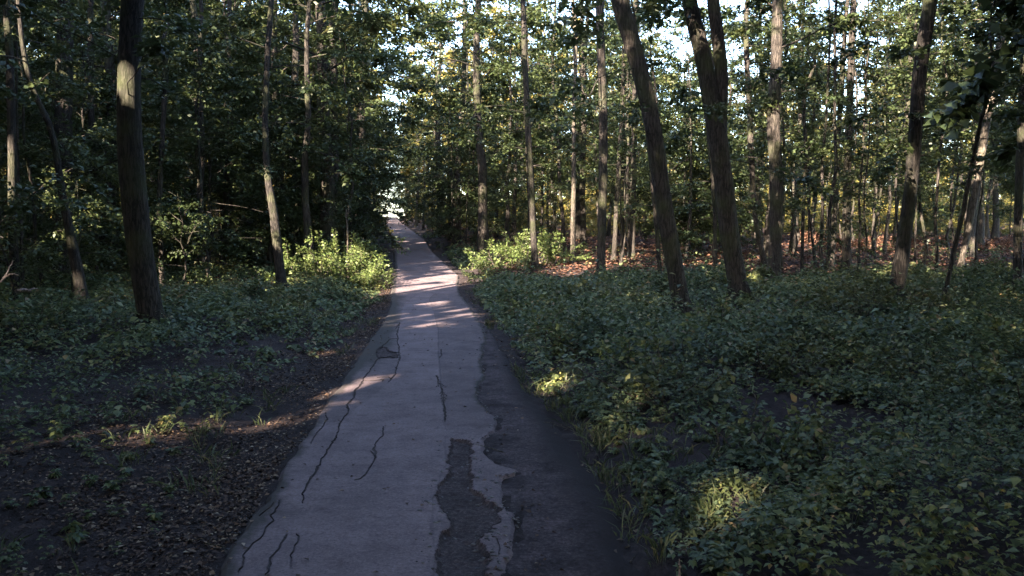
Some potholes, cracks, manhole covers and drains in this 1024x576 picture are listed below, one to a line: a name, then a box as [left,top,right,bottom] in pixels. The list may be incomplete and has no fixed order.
crack [436,375,447,420]
crack [301,322,401,503]
crack [238,503,300,575]
